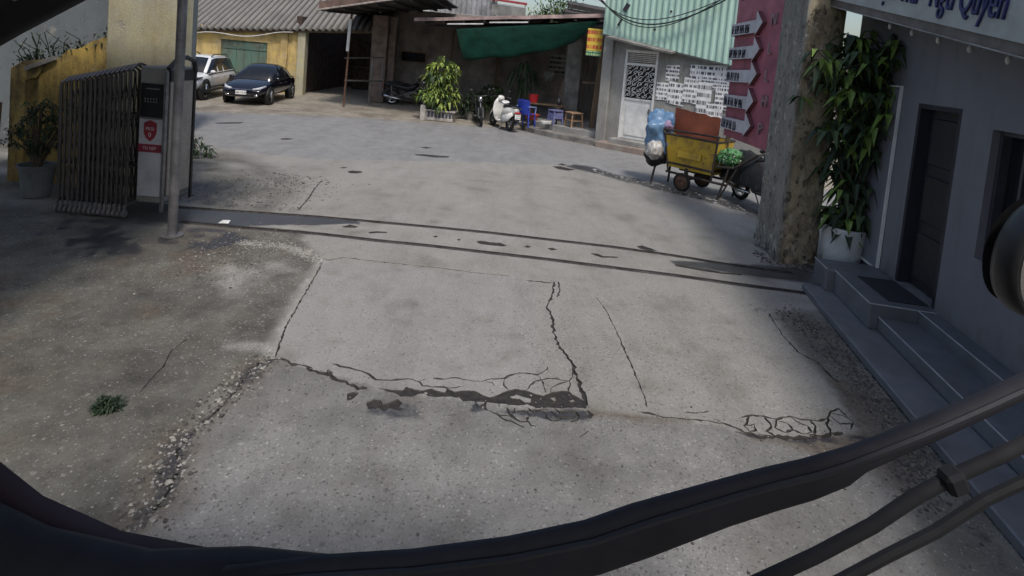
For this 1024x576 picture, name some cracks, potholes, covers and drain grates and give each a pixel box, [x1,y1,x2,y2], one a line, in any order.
crack [140,339,187,392]
crack [152,264,859,514]
